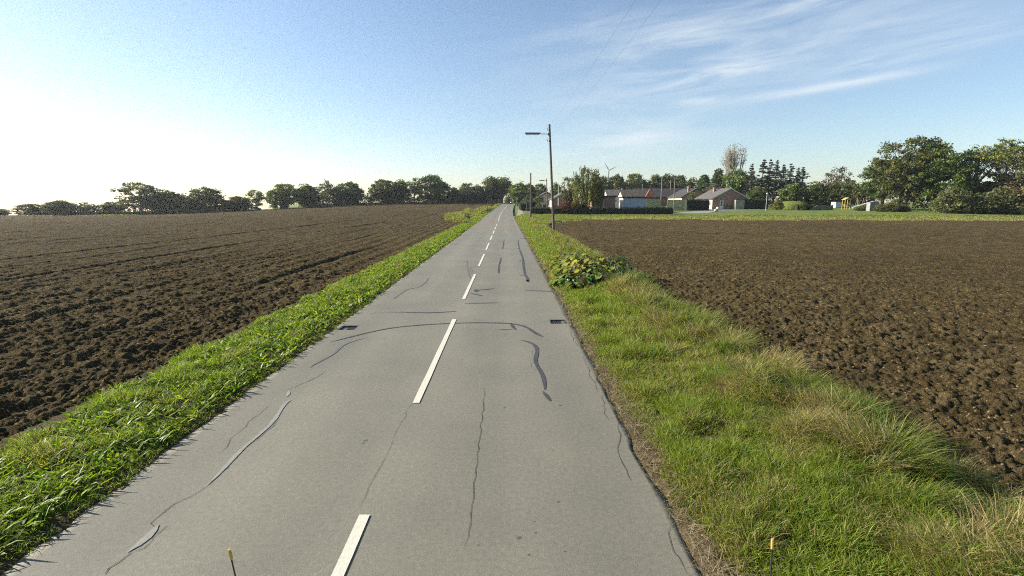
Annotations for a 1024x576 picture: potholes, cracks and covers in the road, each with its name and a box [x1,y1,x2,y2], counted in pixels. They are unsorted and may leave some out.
crack [570,331,649,480]
crack [464,392,485,546]
